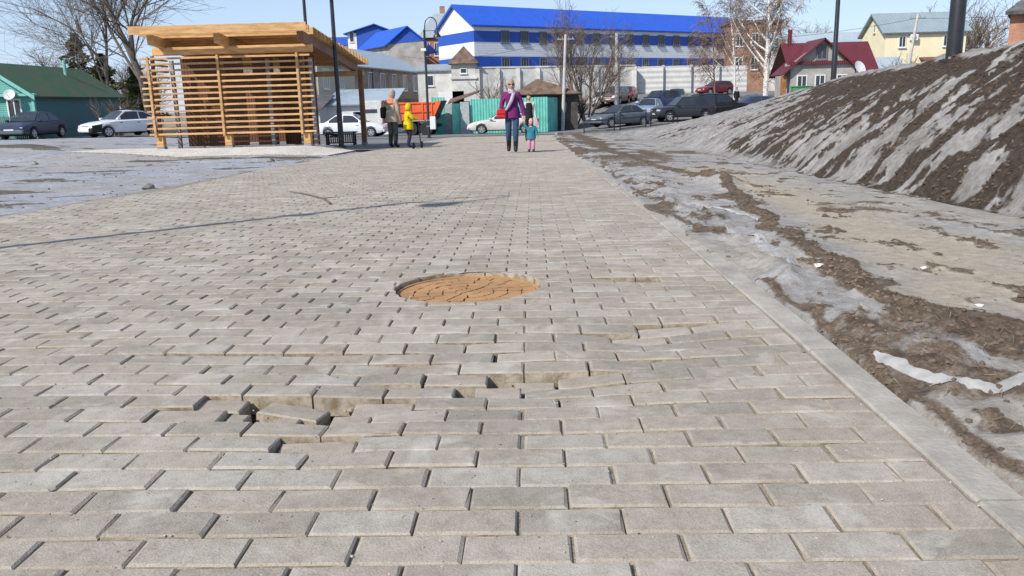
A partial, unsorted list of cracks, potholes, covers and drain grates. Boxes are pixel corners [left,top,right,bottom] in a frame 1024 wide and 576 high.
manhole cover [396,276,539,305]
pothole [424,375,556,400]
